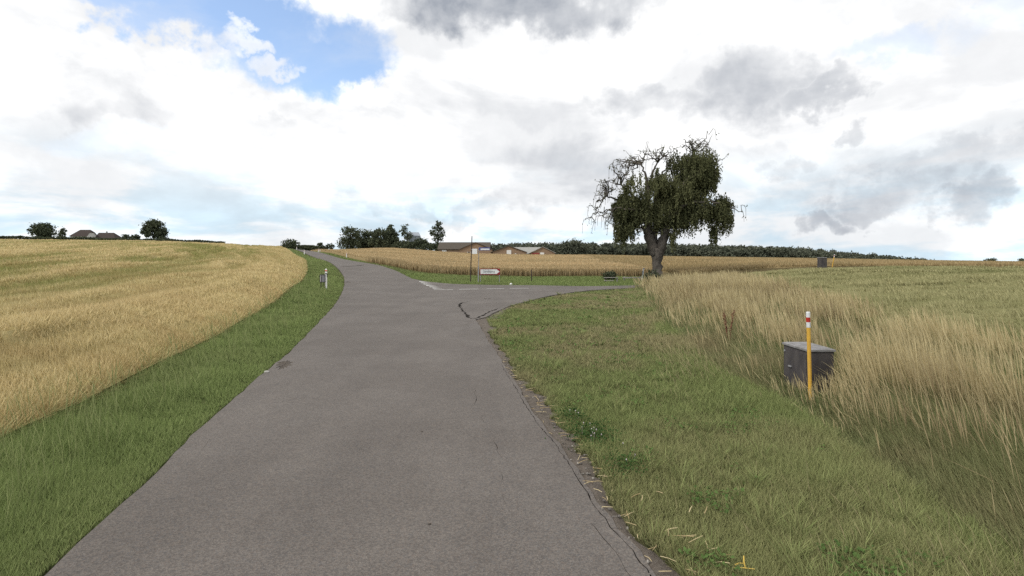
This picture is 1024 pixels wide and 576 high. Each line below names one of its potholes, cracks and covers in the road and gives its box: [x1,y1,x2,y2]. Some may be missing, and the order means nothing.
crack [458,301,497,319]
